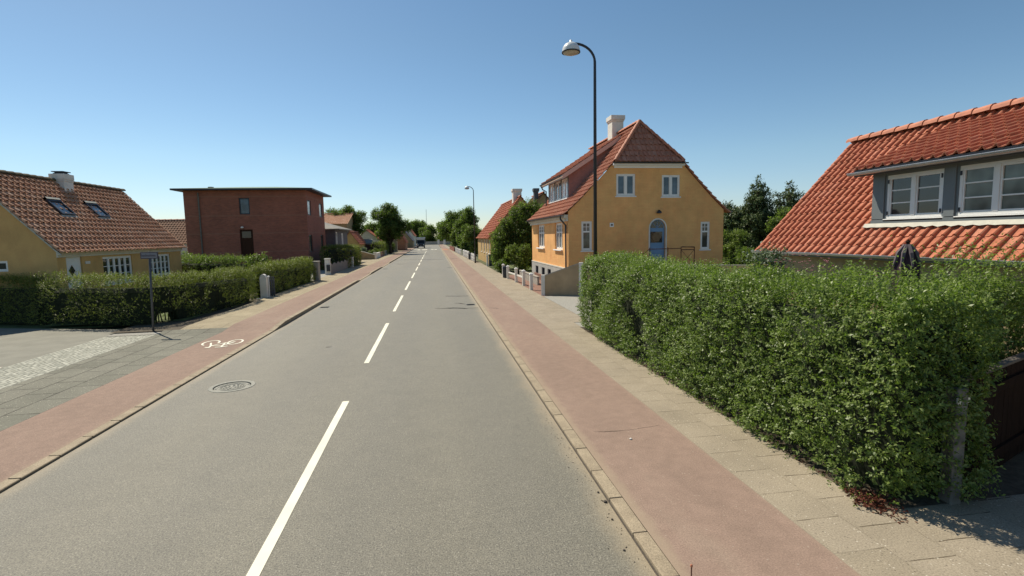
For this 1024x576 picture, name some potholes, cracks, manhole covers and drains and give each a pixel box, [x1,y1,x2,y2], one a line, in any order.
manhole cover [208,380,256,393]
